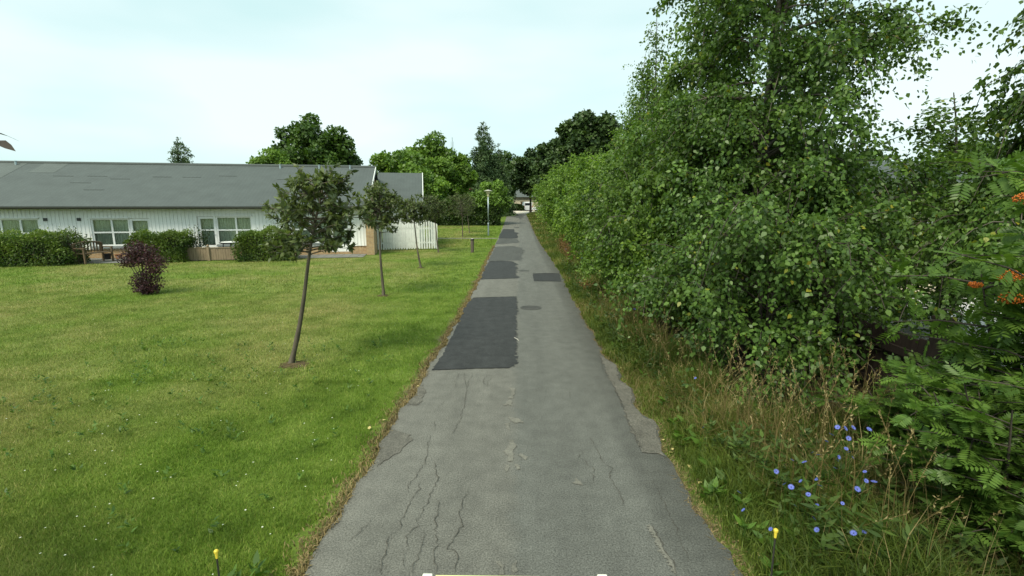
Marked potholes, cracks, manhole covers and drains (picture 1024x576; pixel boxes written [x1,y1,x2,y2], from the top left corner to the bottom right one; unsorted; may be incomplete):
crack [652,480,689,567]
pothole [504,439,517,461]
crack [380,373,485,574]
